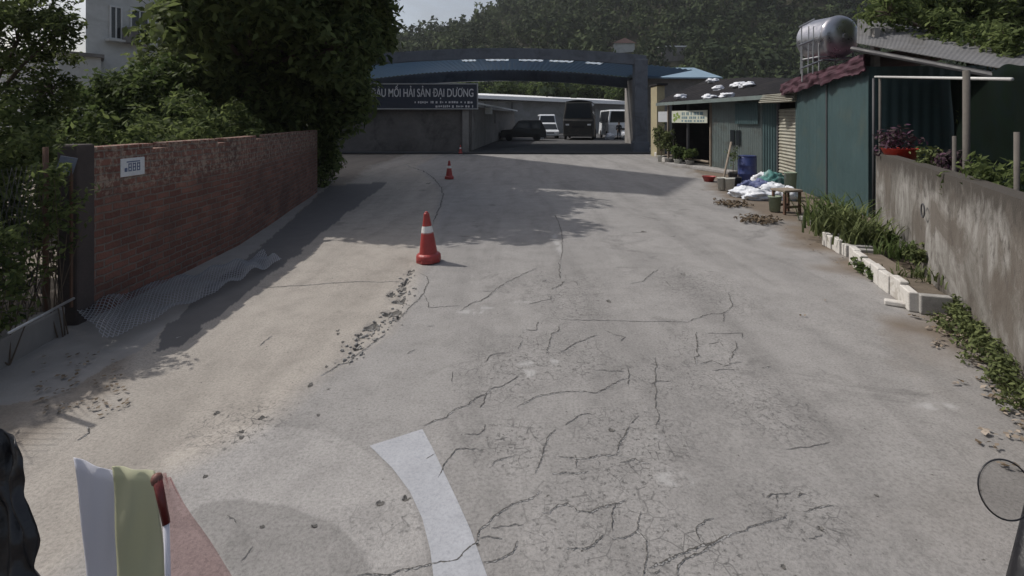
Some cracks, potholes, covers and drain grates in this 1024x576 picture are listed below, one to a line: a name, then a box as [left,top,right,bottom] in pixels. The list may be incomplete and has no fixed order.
crack [689,293,743,370]
crack [423,322,648,477]
crack [354,491,834,576]
crack [320,262,578,376]
crack [652,357,671,424]
crack [404,164,444,226]
